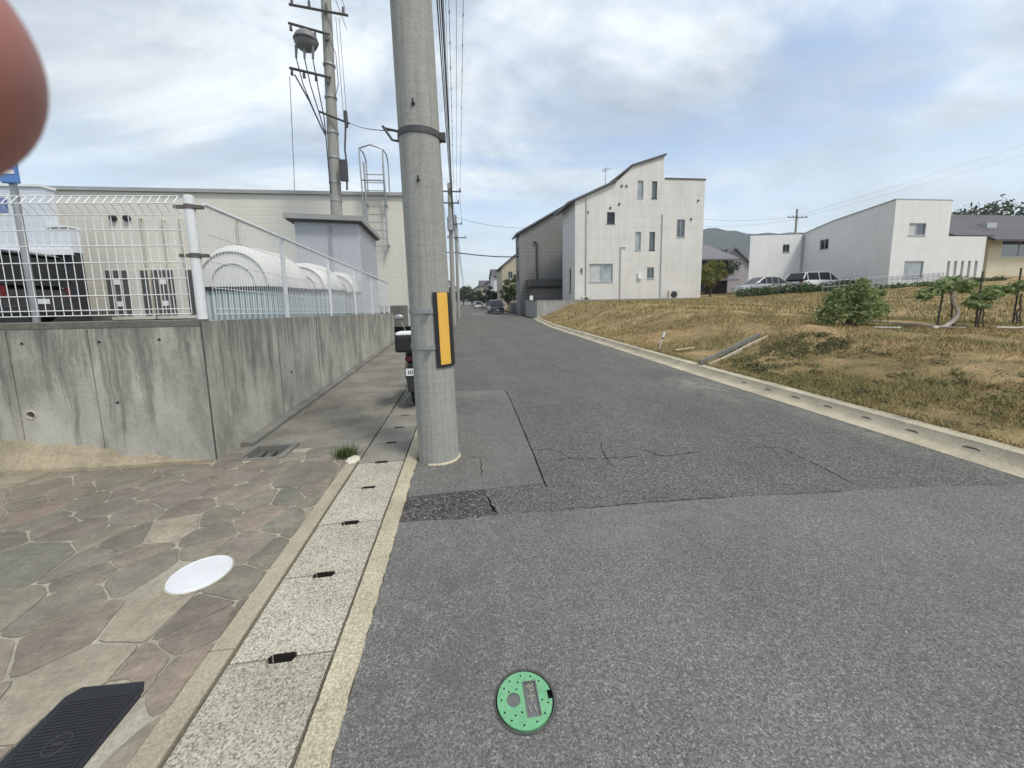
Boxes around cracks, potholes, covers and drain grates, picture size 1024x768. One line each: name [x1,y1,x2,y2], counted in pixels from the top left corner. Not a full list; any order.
crack [505,390,694,487]
manhole cover [494,669,556,736]
